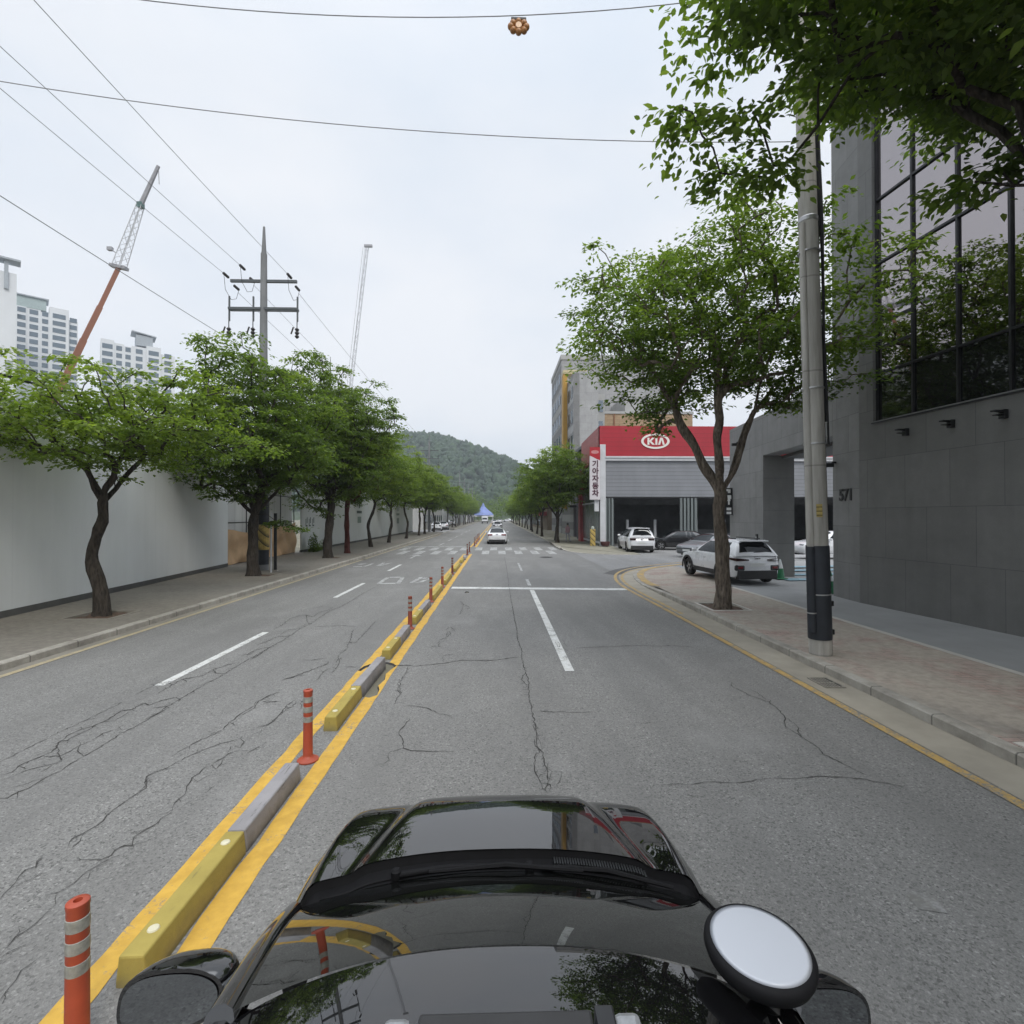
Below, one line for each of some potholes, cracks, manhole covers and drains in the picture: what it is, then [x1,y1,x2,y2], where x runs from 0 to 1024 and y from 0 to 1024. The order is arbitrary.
crack [667,684,903,787]
drain grate [807,677,847,688]
crack [0,557,565,1004]
